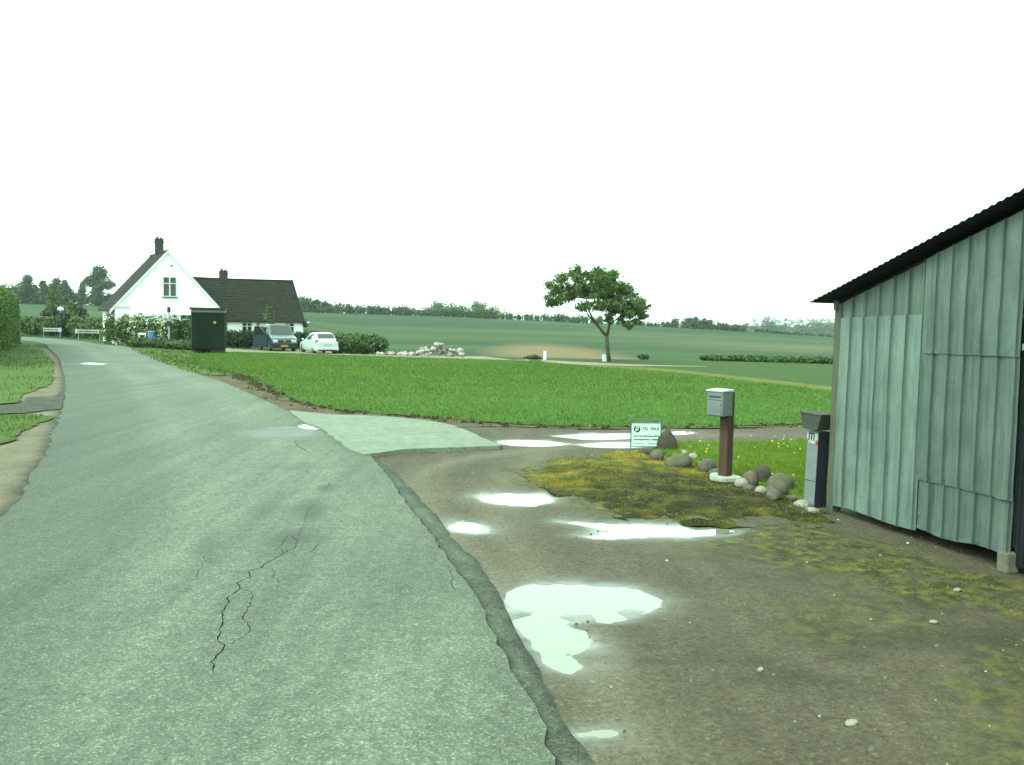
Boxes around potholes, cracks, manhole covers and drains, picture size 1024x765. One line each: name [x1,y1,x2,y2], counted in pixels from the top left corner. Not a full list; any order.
crack [210,506,319,671]
